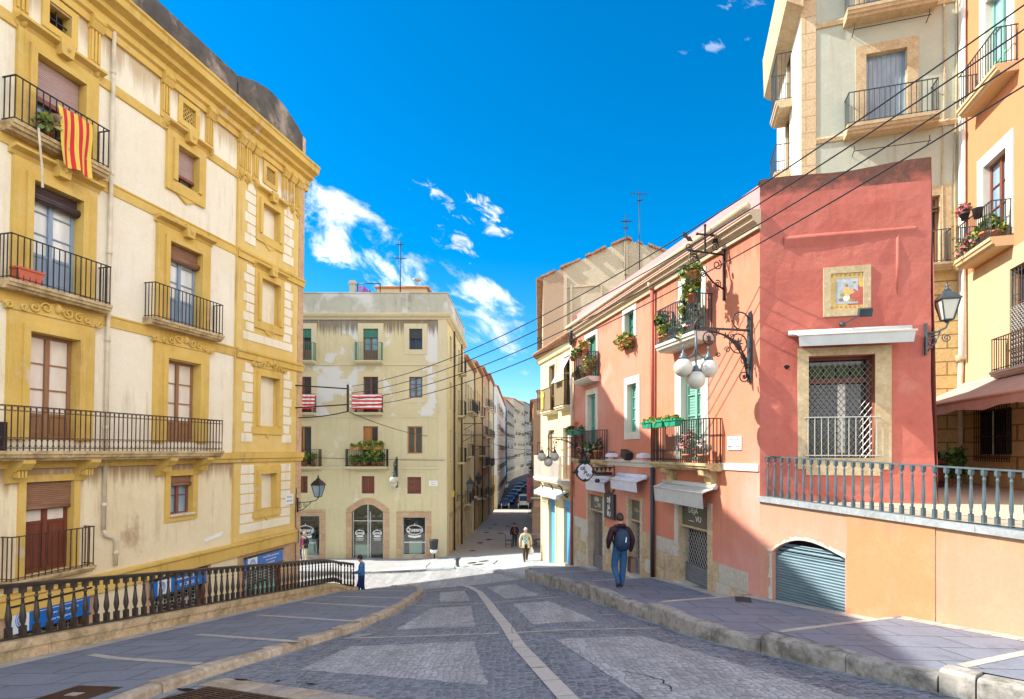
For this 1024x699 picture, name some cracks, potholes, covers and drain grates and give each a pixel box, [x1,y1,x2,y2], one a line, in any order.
drain grate [162,686,289,699]
manhole cover [36,685,122,699]
